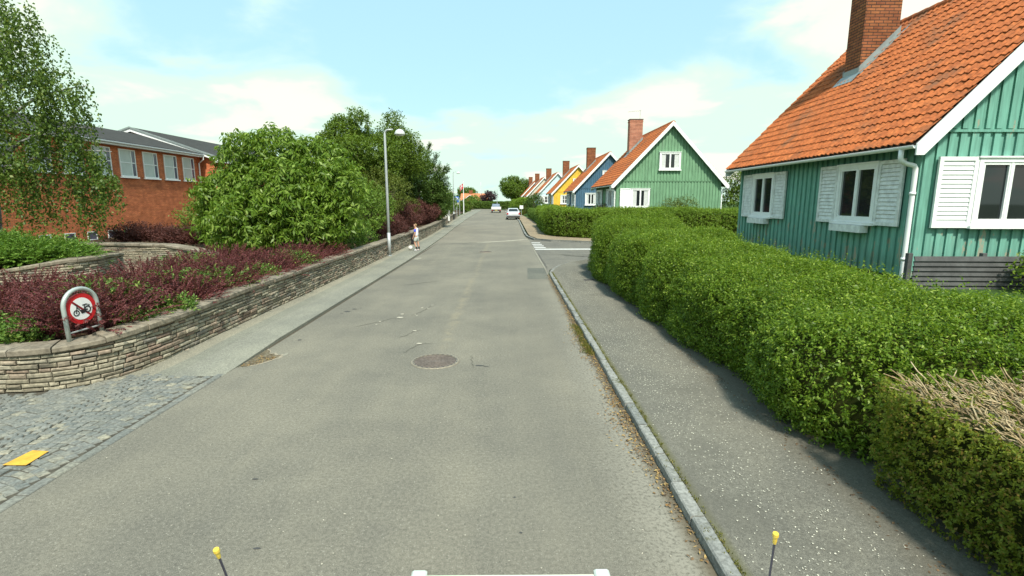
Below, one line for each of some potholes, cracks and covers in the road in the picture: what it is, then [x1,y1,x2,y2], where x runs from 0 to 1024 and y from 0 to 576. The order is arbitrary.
manhole cover [411,354,459,369]
crack [360,306,432,353]
